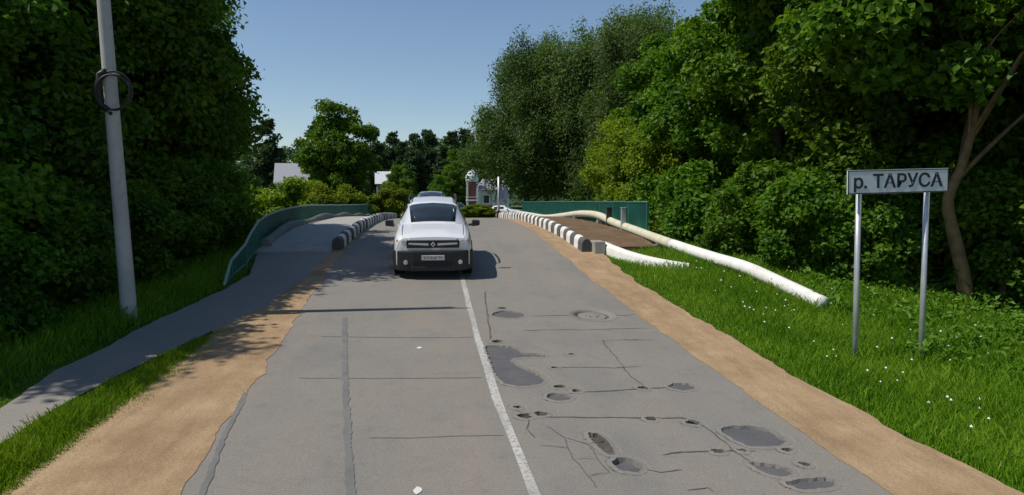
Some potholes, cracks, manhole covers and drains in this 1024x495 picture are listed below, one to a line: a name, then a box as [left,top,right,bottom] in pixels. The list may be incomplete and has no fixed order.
pothole [529,410,553,418]
pothole [606,455,649,476]
pothole [483,344,549,388]
pothole [779,475,843,493]
crack [524,314,668,392]
pothole [512,412,537,421]
pothole [583,431,620,457]
pothole [663,381,701,392]
manhole cover [567,308,618,322]
pothole [743,460,799,479]
crack [514,409,752,491]
pothole [542,392,576,403]
